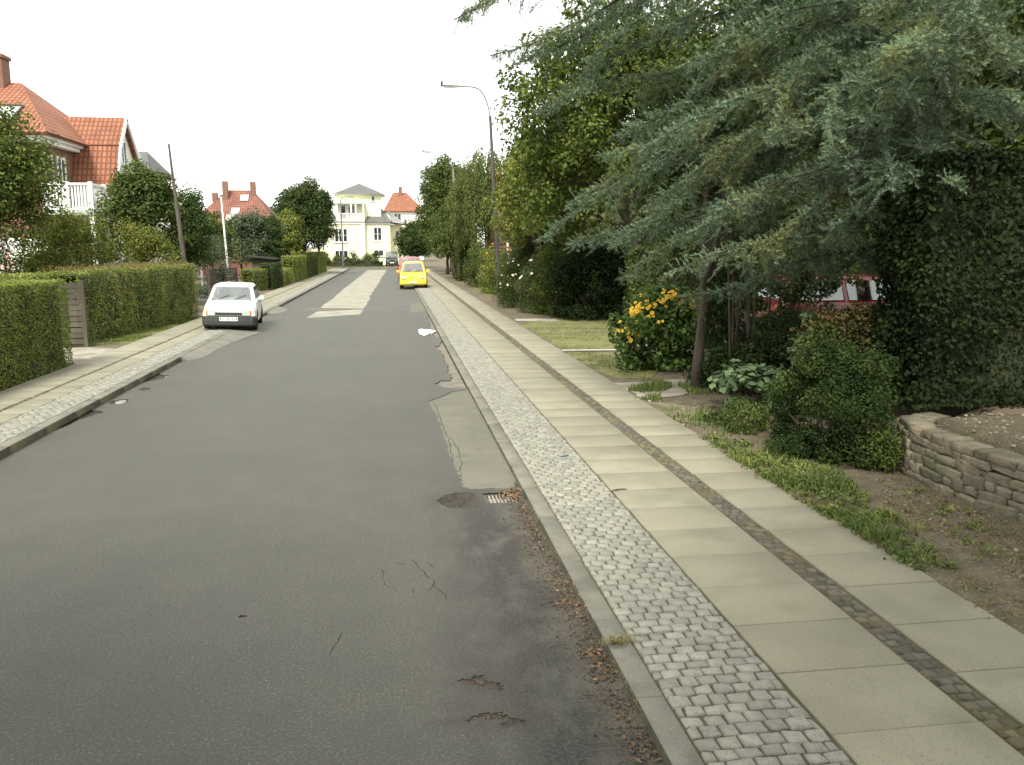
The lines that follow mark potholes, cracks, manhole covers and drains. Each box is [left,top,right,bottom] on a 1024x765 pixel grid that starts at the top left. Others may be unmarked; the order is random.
crack [367,560,449,600]
pothole [466,711,527,728]
pothole [456,675,504,691]
pothole [436,492,479,509]
drain grate [483,494,521,503]
crack [425,389,465,483]
